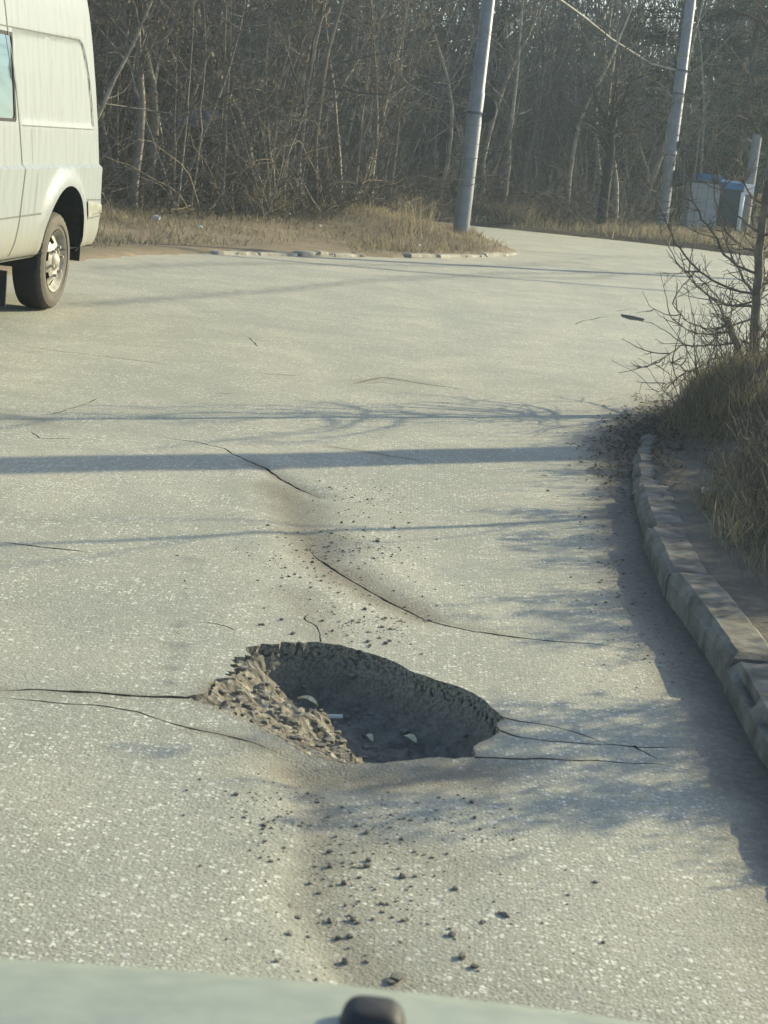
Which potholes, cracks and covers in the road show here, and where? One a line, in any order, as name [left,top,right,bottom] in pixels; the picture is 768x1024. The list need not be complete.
crack [5,542,90,553]
crack [303,547,649,652]
crack [166,437,319,498]
crack [1,689,277,753]
crack [354,377,467,391]
pothole [187,641,504,764]
crack [474,717,689,771]
